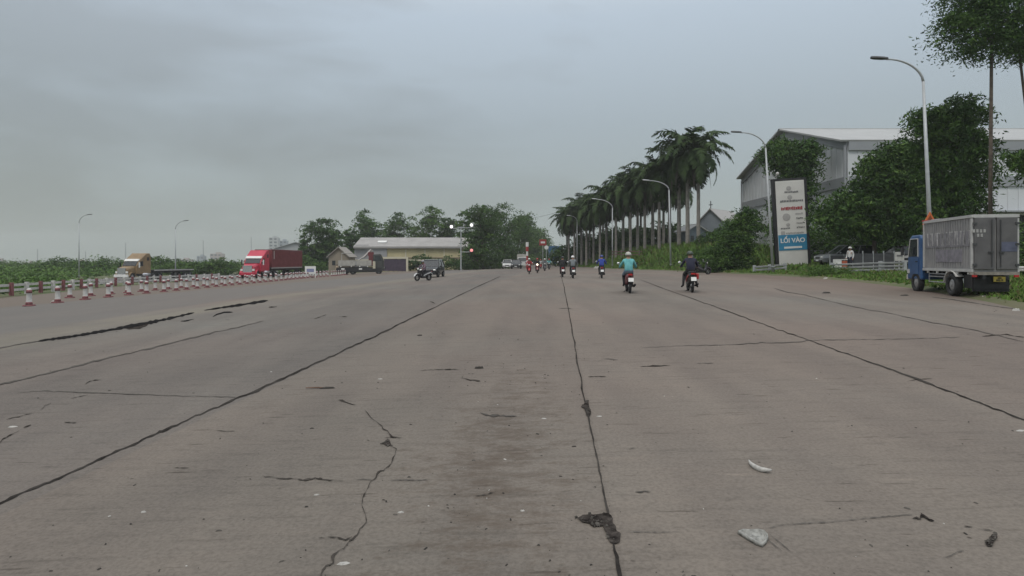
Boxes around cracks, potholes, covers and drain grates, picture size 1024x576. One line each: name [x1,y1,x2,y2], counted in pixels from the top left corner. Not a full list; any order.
pothole [575,512,621,543]
crack [264,399,428,576]
crack [39,300,277,341]
